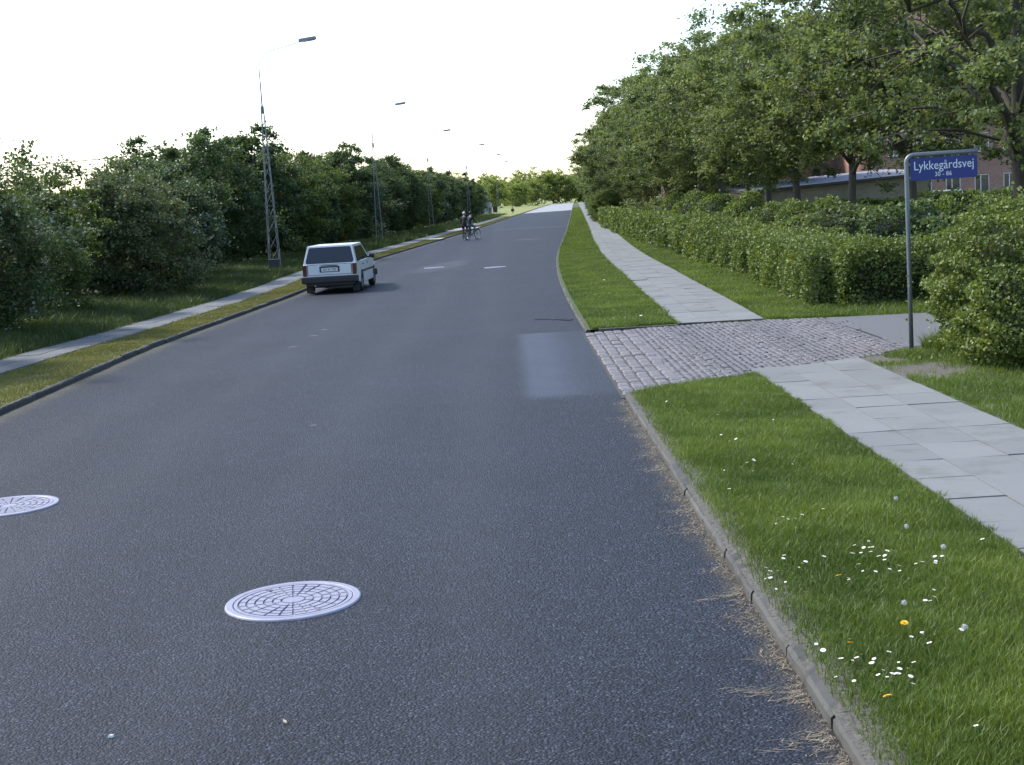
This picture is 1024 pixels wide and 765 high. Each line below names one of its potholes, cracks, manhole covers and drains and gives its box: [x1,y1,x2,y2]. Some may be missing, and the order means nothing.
manhole cover [0,495,60,517]
manhole cover [225,581,361,622]
